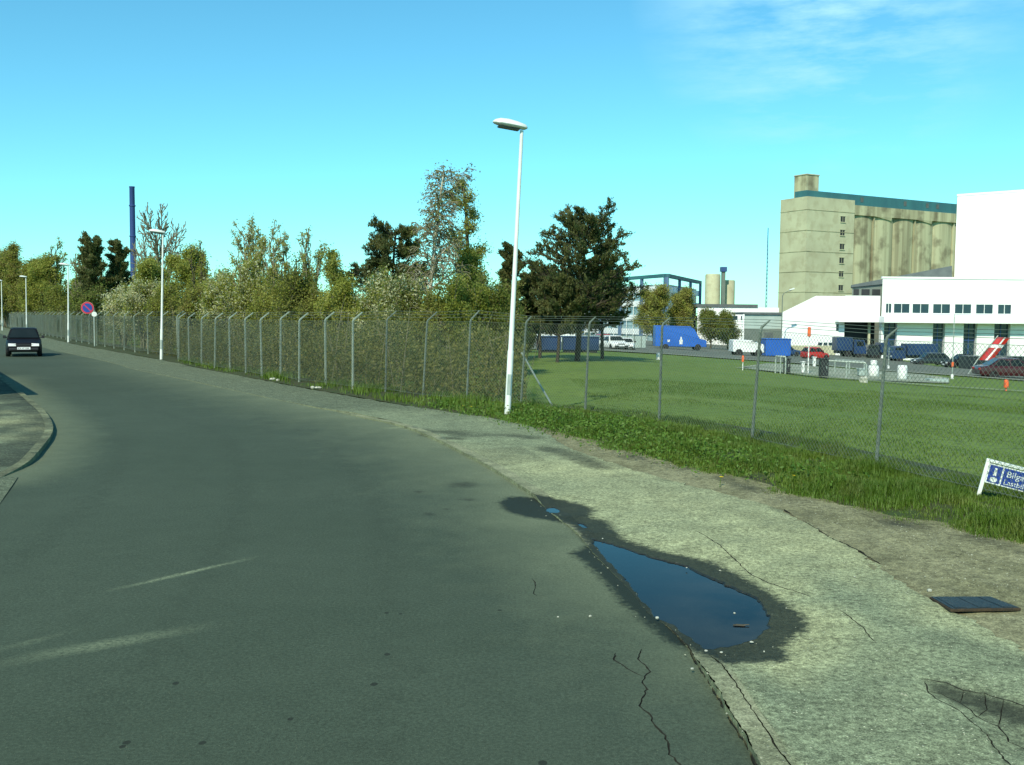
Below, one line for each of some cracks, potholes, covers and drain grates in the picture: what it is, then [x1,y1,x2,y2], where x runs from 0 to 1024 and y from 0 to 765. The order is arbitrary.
crack [613,625,758,765]
crack [924,679,1024,765]
pothole [591,538,772,650]
crack [697,531,808,596]
crack [784,509,880,564]
manhole cover [929,596,1021,614]
